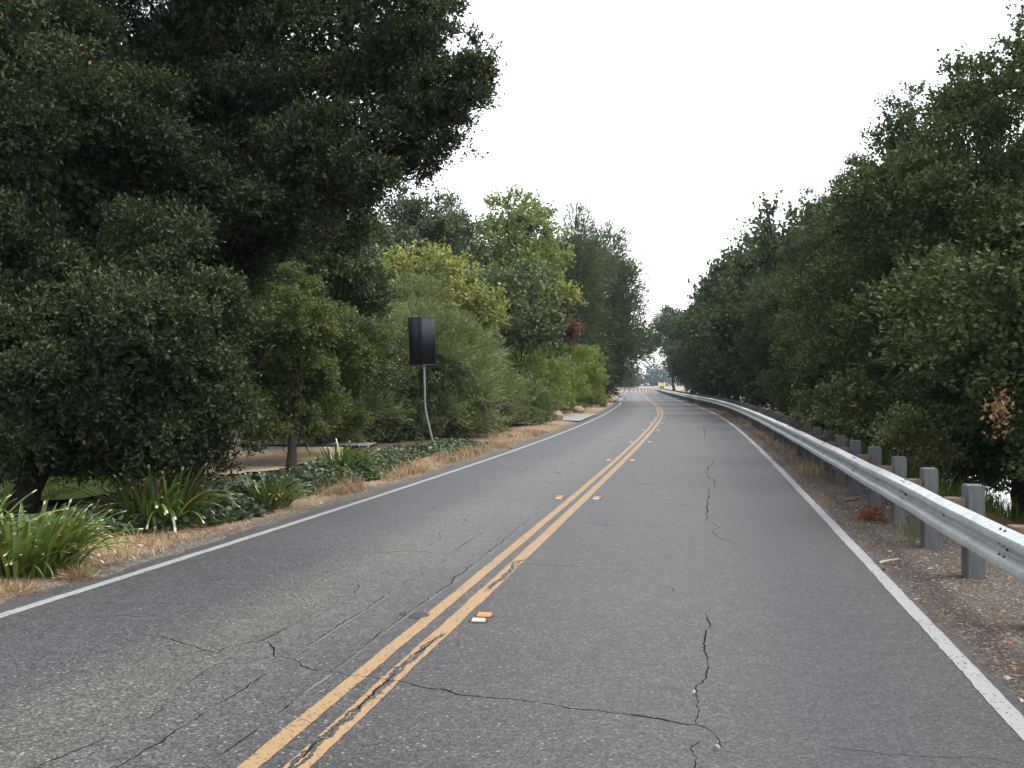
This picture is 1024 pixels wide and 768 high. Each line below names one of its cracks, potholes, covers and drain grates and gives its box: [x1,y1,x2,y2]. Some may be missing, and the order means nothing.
crack [611,438,737,544]
crack [35,508,750,768]
